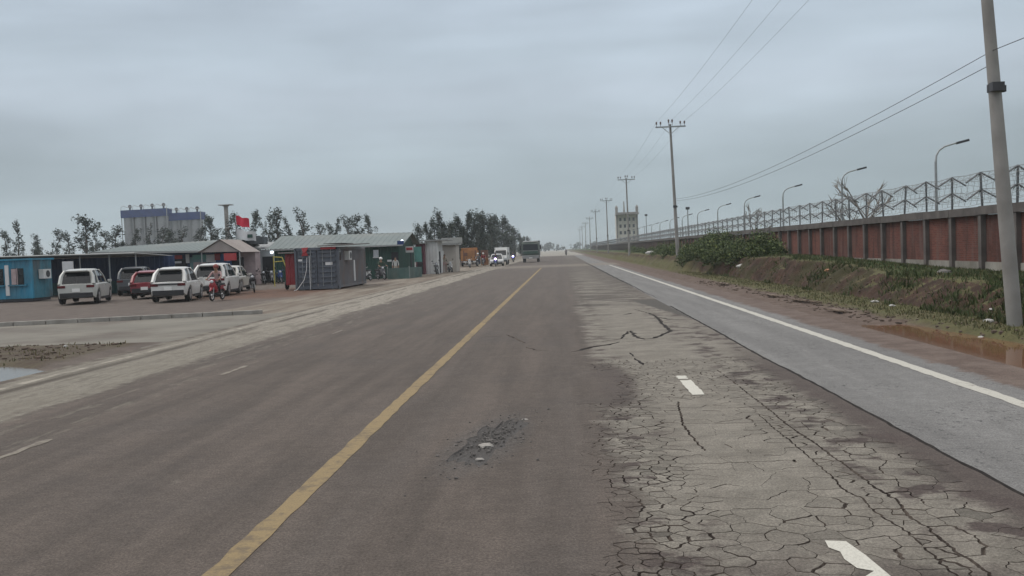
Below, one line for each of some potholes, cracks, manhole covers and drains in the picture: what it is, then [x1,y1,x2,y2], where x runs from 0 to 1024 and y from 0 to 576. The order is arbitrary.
crack [573,305,677,365]
crack [577,357,1024,576]
pothole [446,418,529,466]
